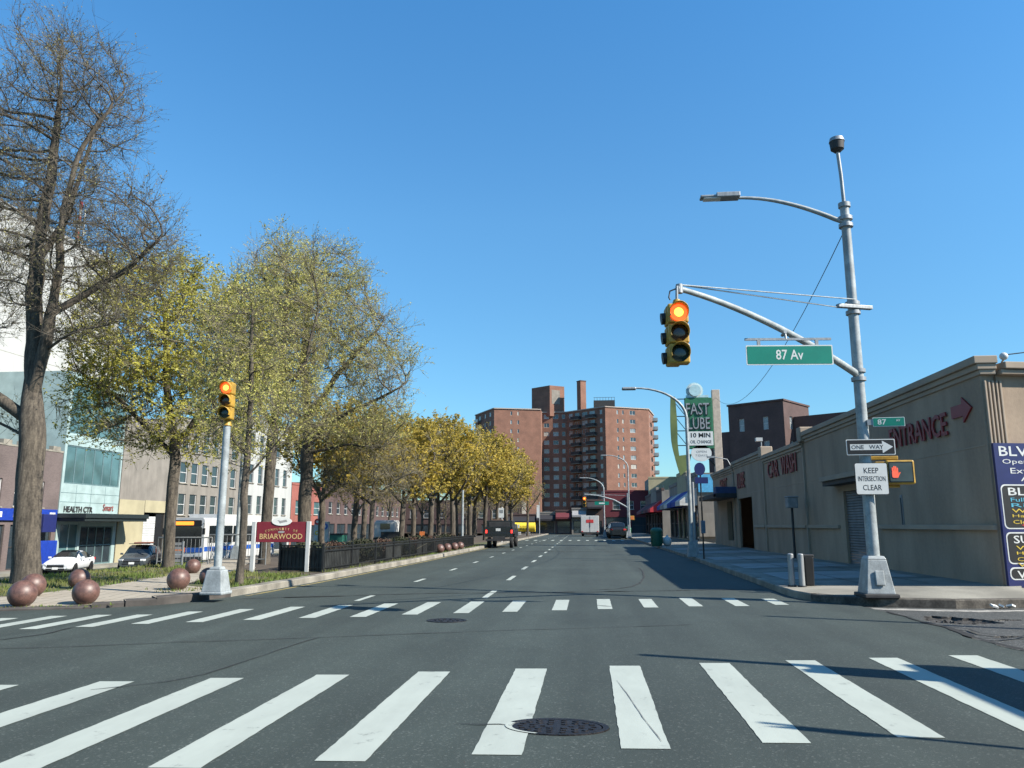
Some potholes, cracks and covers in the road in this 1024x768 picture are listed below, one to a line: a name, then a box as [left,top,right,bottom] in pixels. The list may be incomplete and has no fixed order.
pothole [923,616,1004,625]
manhole cover [505,718,609,736]
